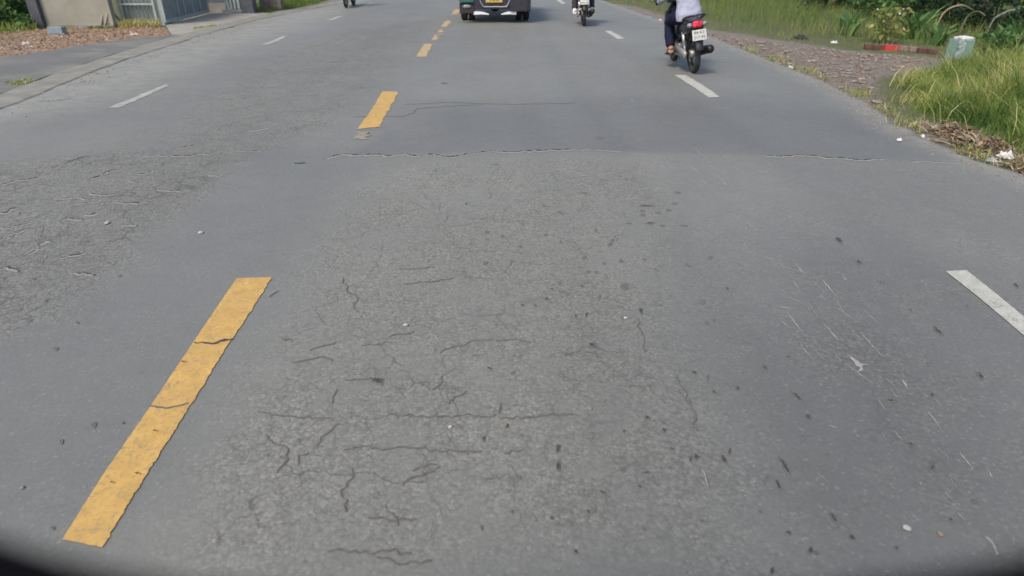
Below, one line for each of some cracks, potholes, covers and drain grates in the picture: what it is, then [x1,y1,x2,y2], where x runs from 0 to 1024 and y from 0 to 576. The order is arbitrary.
crack [258,338,482,526]
crack [354,104,484,117]
crack [388,375,578,419]
crack [362,331,414,346]
crack [676,375,699,431]
crack [762,154,970,164]
crack [342,277,360,312]
crack [440,338,531,353]
crack [0,145,221,276]
crack [327,548,432,565]
crack [636,318,646,351]
crack [400,266,454,284]
